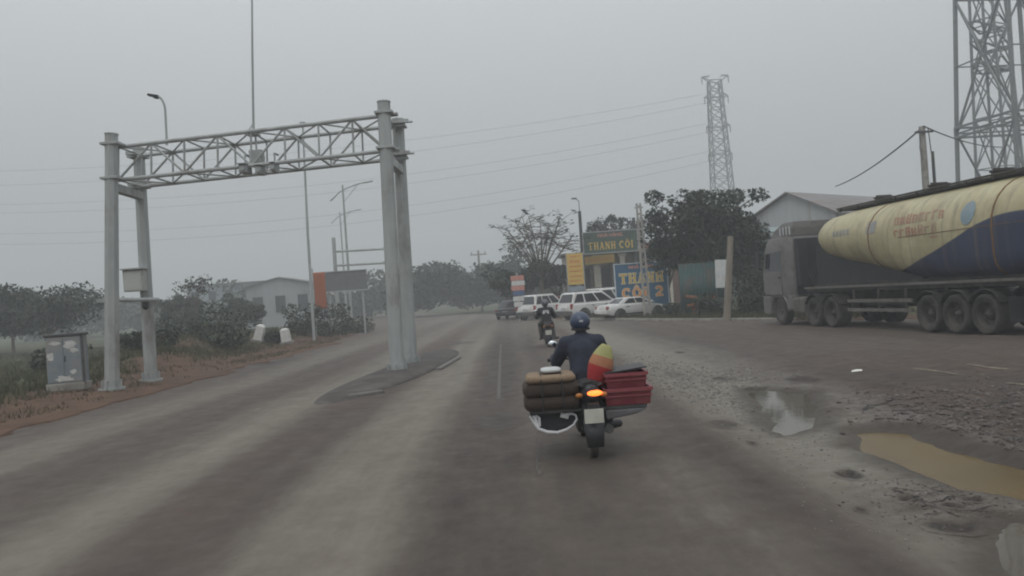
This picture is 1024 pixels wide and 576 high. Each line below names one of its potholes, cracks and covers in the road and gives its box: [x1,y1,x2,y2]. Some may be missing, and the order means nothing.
pothole [918,517,991,537]
pothole [701,419,747,429]
pothole [830,468,869,481]
pothole [777,375,830,383]
crack [892,487,990,516]
pothole [892,492,927,503]
